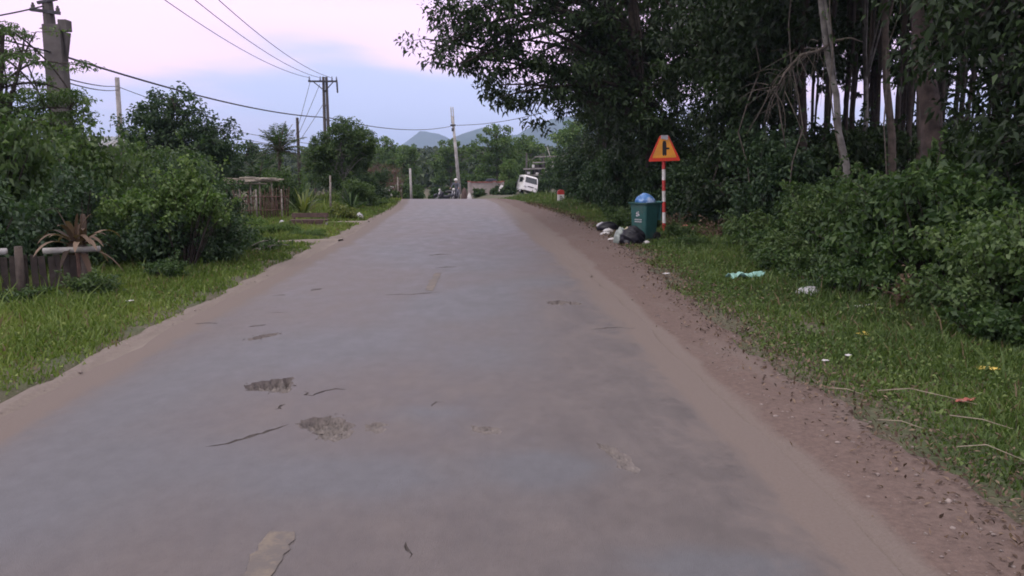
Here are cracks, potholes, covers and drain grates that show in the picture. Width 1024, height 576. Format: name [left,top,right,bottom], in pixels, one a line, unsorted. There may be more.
pothole [295,413,356,442]
pothole [244,377,296,394]
pothole [470,425,502,435]
crack [304,388,345,396]
crack [206,404,288,447]
pothole [365,421,389,435]
